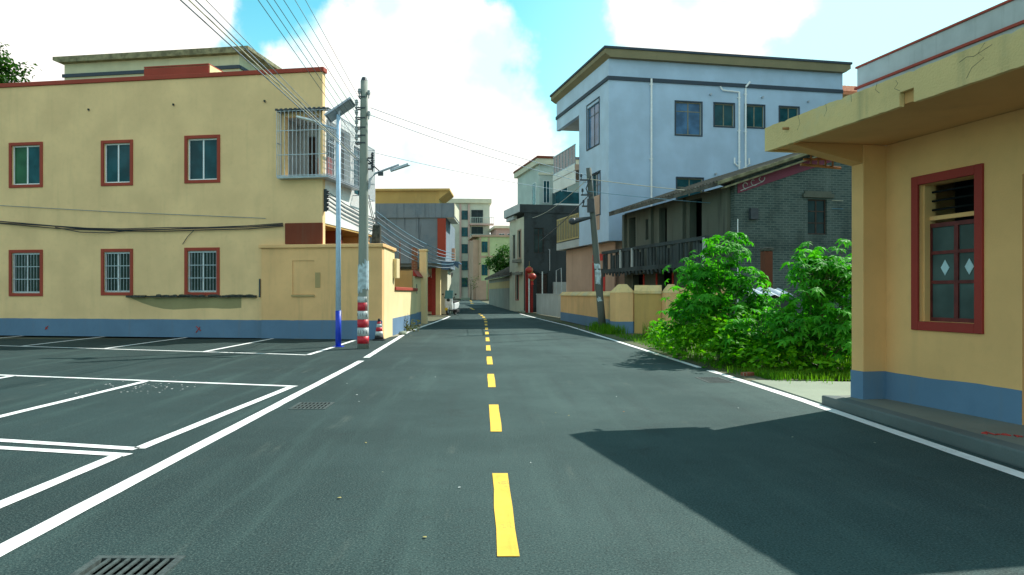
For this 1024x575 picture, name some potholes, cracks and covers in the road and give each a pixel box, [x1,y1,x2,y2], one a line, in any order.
drain grate [70,555,186,575]
